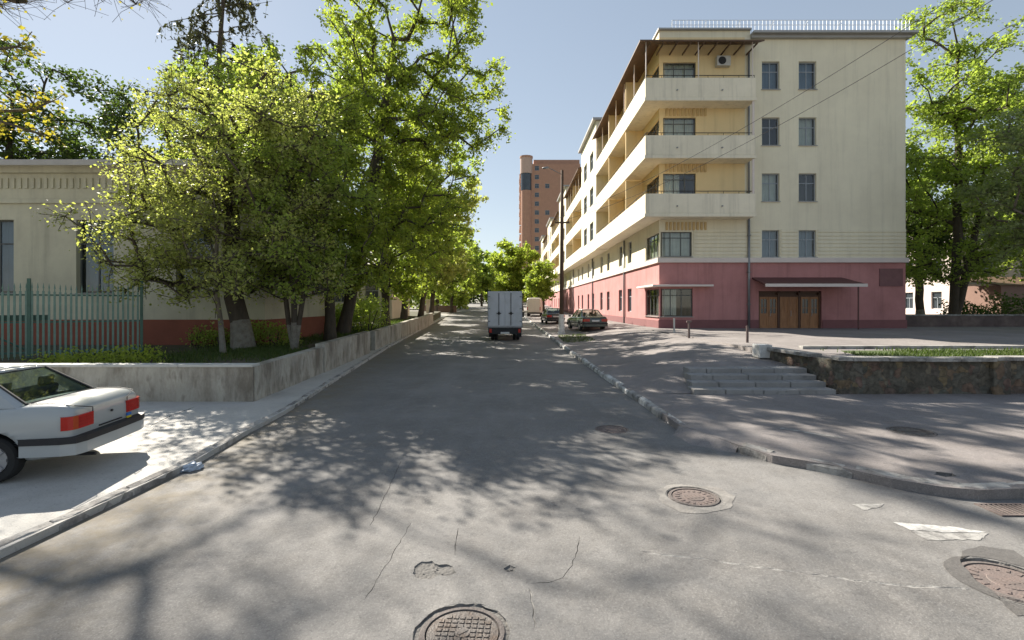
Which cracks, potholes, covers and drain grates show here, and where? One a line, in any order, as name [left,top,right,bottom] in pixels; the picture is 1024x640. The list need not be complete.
manhole cover [412,603,511,640]
crack [529,543,579,624]
manhole cover [666,487,722,507]
drain grate [974,503,1024,516]
pothole [413,561,457,579]
manhole cover [960,557,1024,605]
manhole cover [595,425,629,434]
manhole cover [886,426,938,437]
